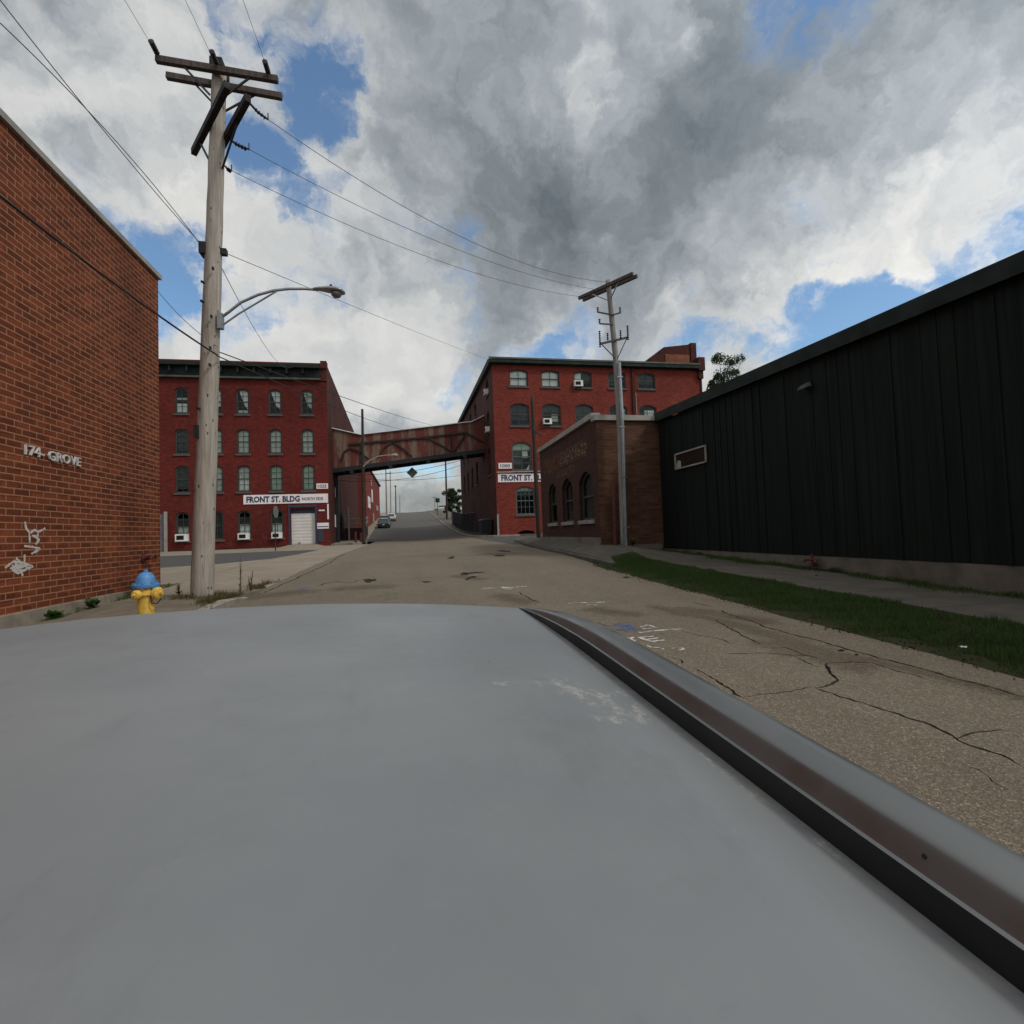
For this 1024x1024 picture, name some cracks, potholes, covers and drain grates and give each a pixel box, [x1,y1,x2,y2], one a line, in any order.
crack [674,603,1024,790]
